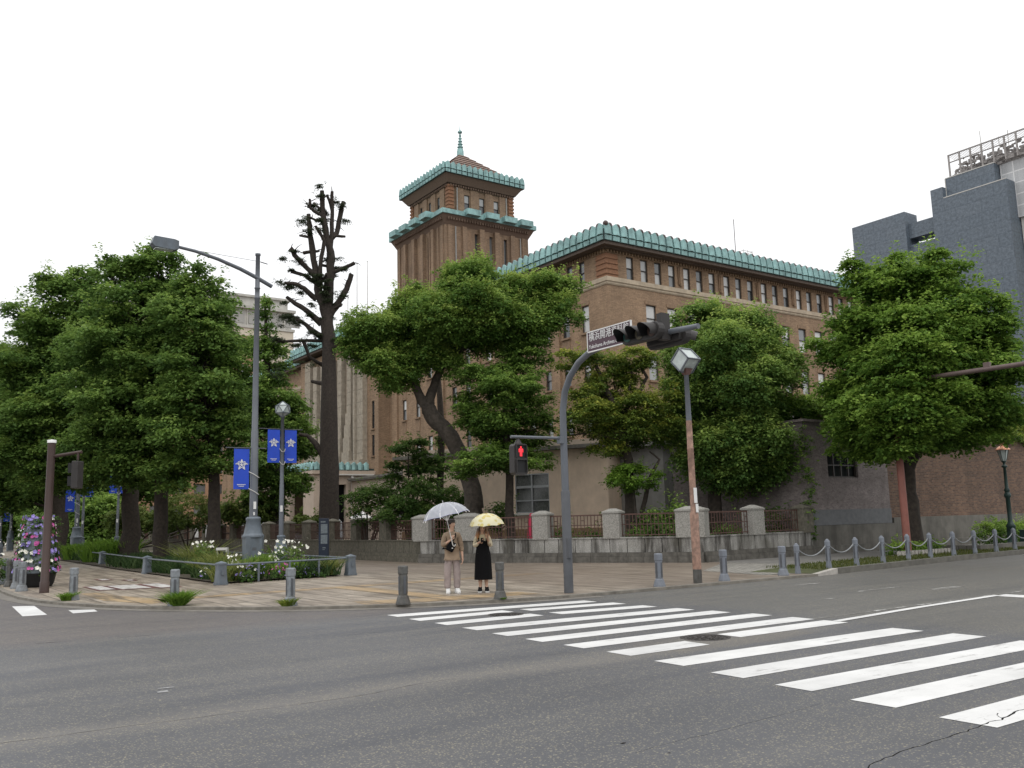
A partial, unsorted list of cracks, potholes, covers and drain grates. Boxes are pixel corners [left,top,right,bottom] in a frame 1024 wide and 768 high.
crack [868,711,1017,768]
